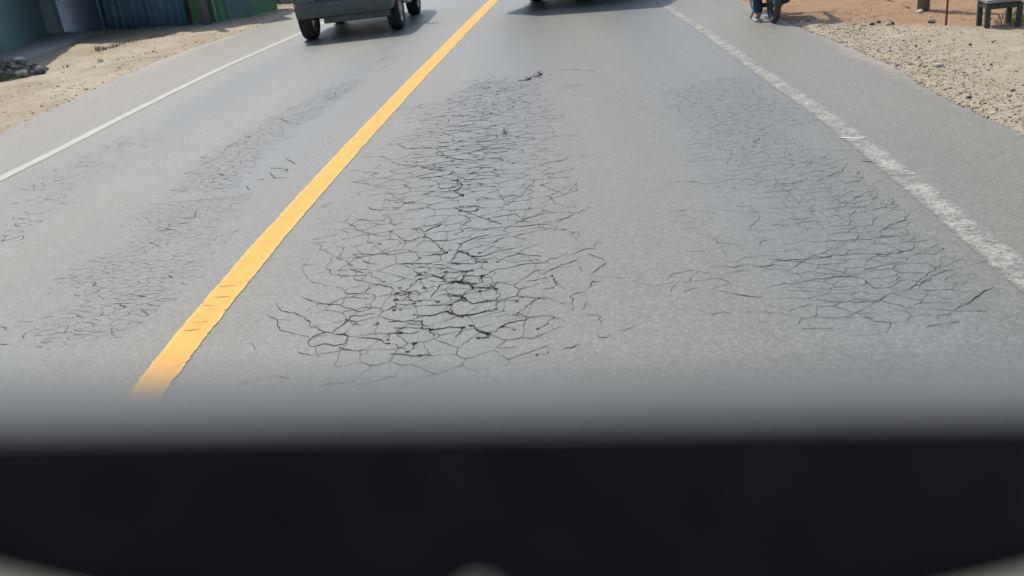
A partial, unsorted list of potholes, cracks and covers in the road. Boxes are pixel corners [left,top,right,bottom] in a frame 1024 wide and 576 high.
crack [634,77,993,335]
crack [3,55,401,349]
crack [518,69,589,86]
